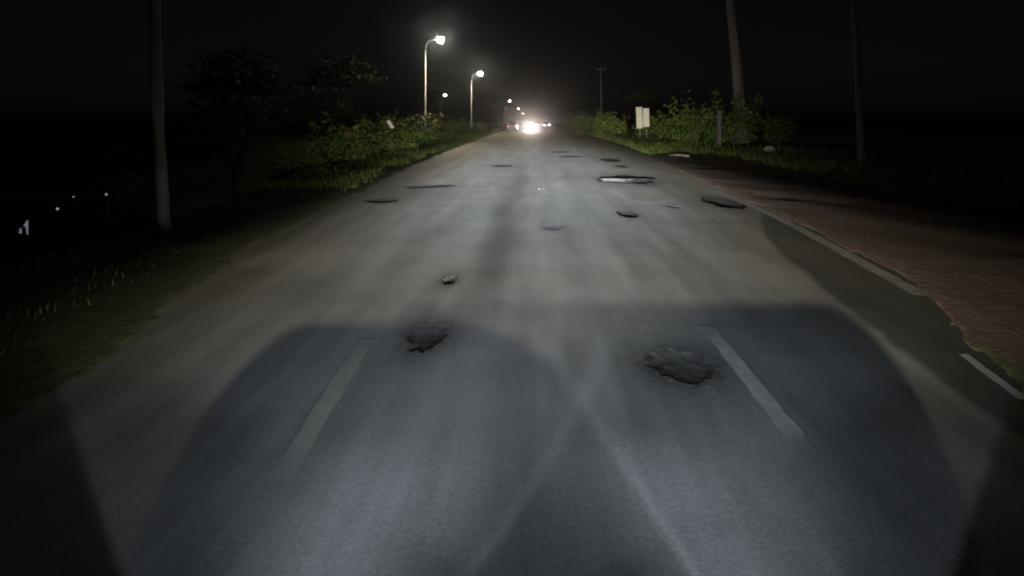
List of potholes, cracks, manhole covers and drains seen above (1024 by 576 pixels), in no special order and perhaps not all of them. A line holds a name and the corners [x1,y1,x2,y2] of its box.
pothole [644,347,716,385]
pothole [406,322,449,353]
pothole [700,197,747,210]
pothole [597,175,656,184]
